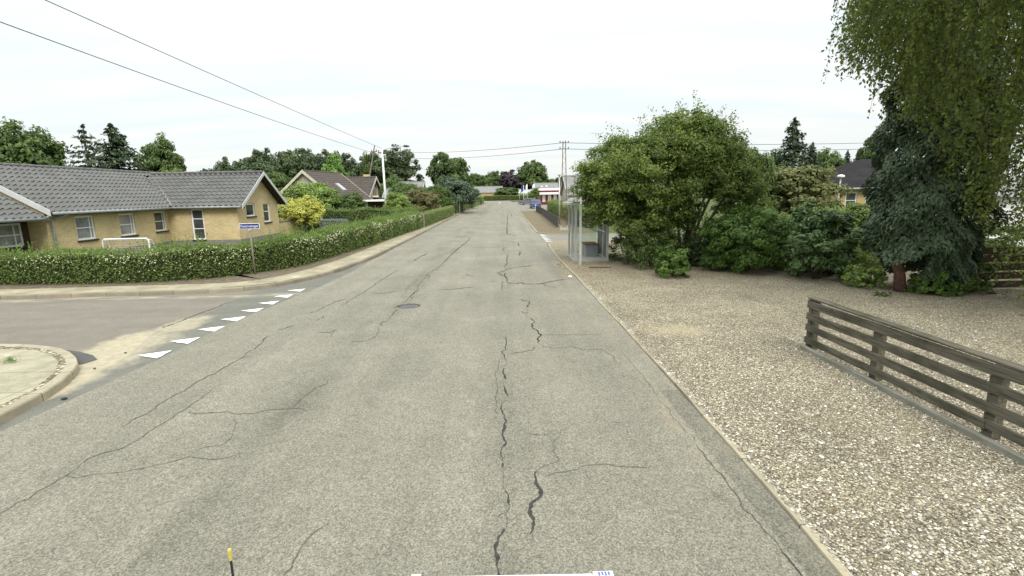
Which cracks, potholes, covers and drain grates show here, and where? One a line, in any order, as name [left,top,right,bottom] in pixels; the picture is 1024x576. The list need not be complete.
crack [528,428,652,535]
crack [311,238,478,342]
crack [493,214,617,575]
crack [6,325,328,510]
